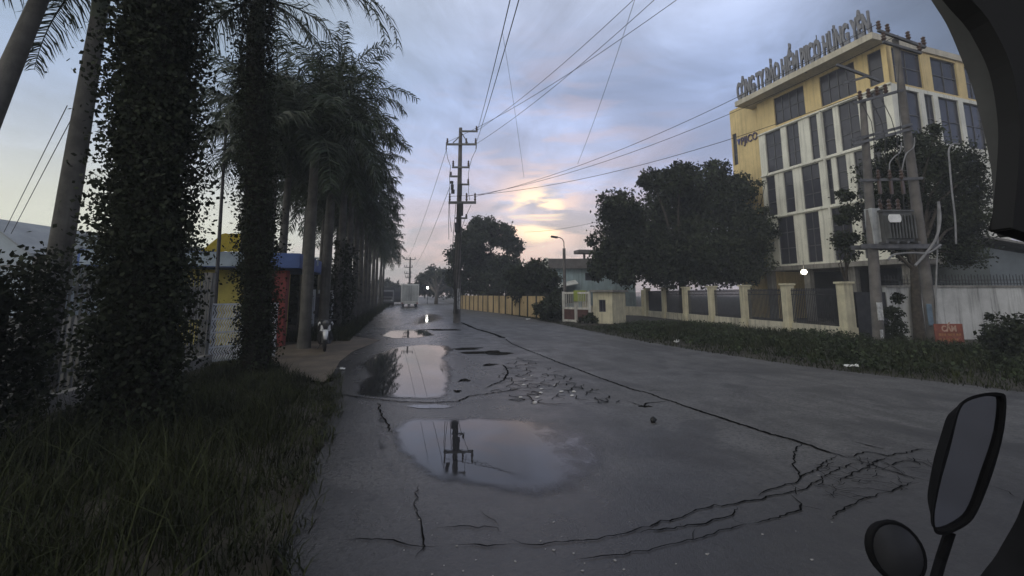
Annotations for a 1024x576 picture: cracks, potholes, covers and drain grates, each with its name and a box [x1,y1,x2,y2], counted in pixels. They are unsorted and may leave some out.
crack [339,339,932,560]
